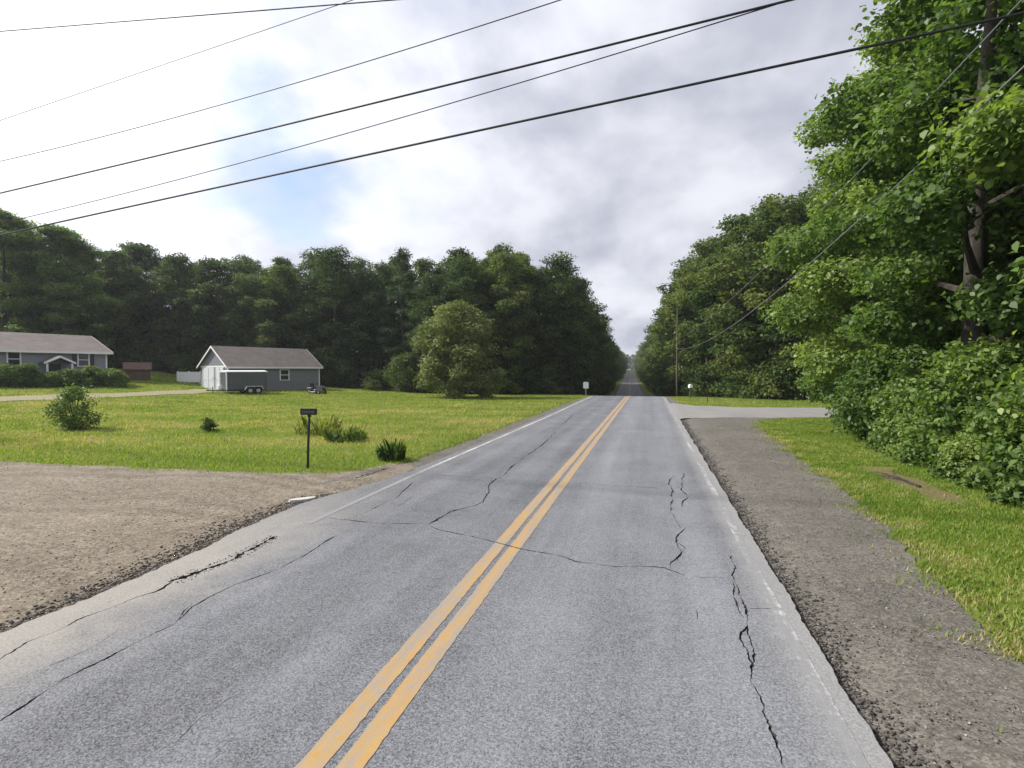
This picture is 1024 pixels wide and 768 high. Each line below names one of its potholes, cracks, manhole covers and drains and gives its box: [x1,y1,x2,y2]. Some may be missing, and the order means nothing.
crack [0,414,784,766]
